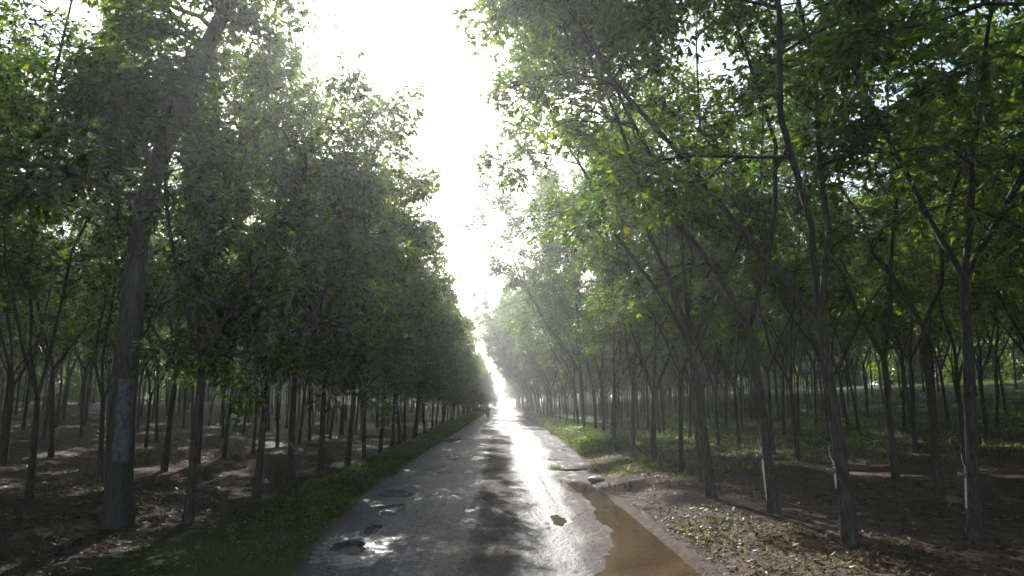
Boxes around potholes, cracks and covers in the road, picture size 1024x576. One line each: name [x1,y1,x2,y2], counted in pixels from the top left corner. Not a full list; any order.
pothole [364,489,422,499]
pothole [368,502,412,518]
pothole [360,523,385,536]
